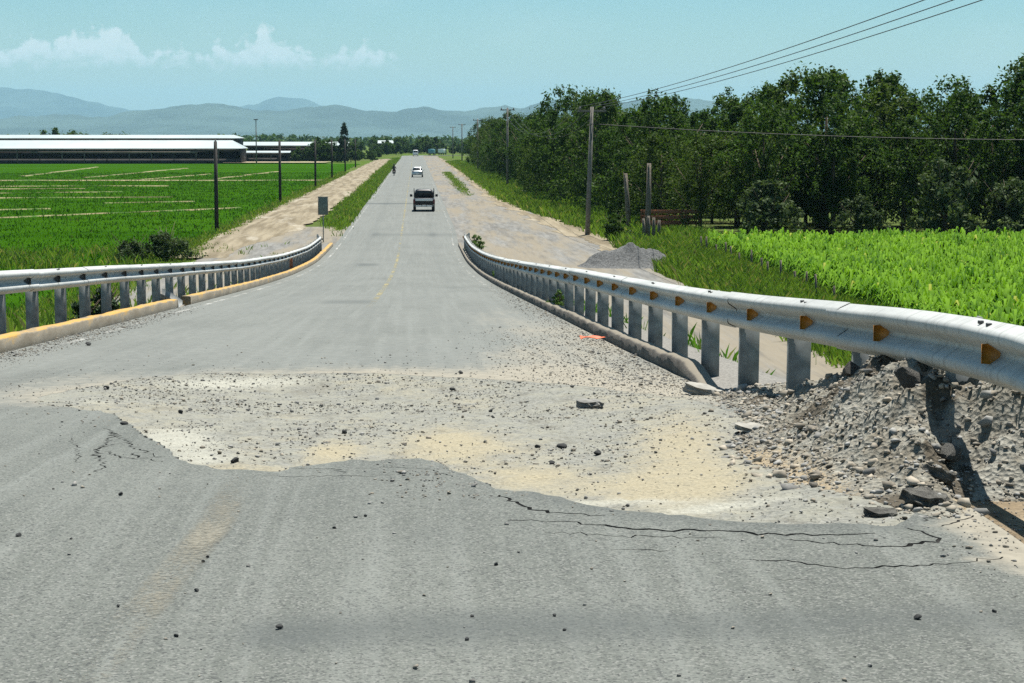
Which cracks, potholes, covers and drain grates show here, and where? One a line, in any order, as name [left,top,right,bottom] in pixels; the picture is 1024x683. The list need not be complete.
pothole [36,373,914,526]
crack [68,428,163,472]
crack [497,495,1002,580]
